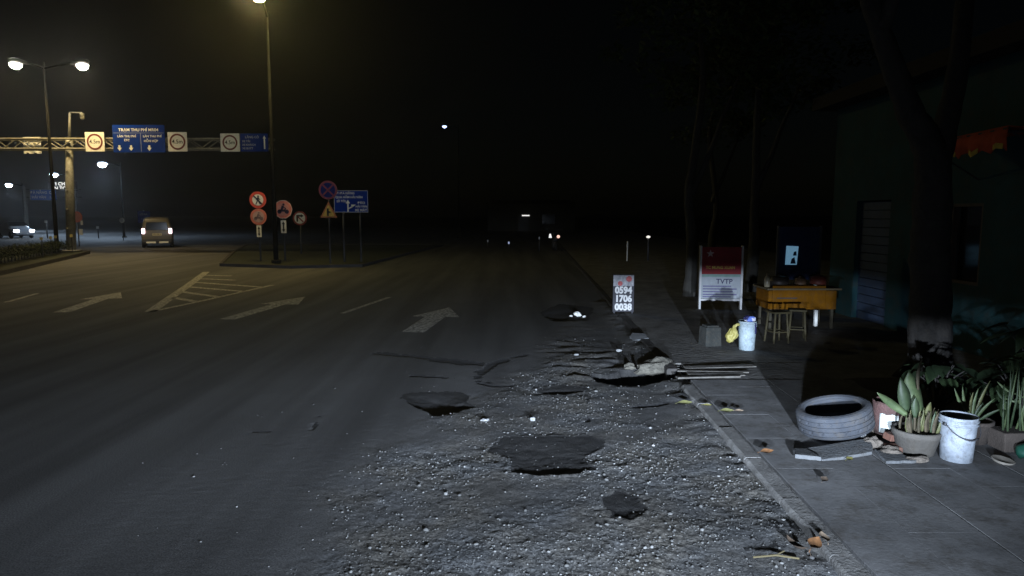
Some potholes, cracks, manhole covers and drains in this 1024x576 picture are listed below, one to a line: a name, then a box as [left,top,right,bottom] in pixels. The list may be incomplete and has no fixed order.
crack [372,352,530,387]
pothole [541,304,594,321]
pothole [488,435,605,476]
pothole [591,368,679,386]
pothole [602,490,647,520]
pothole [399,391,478,416]
